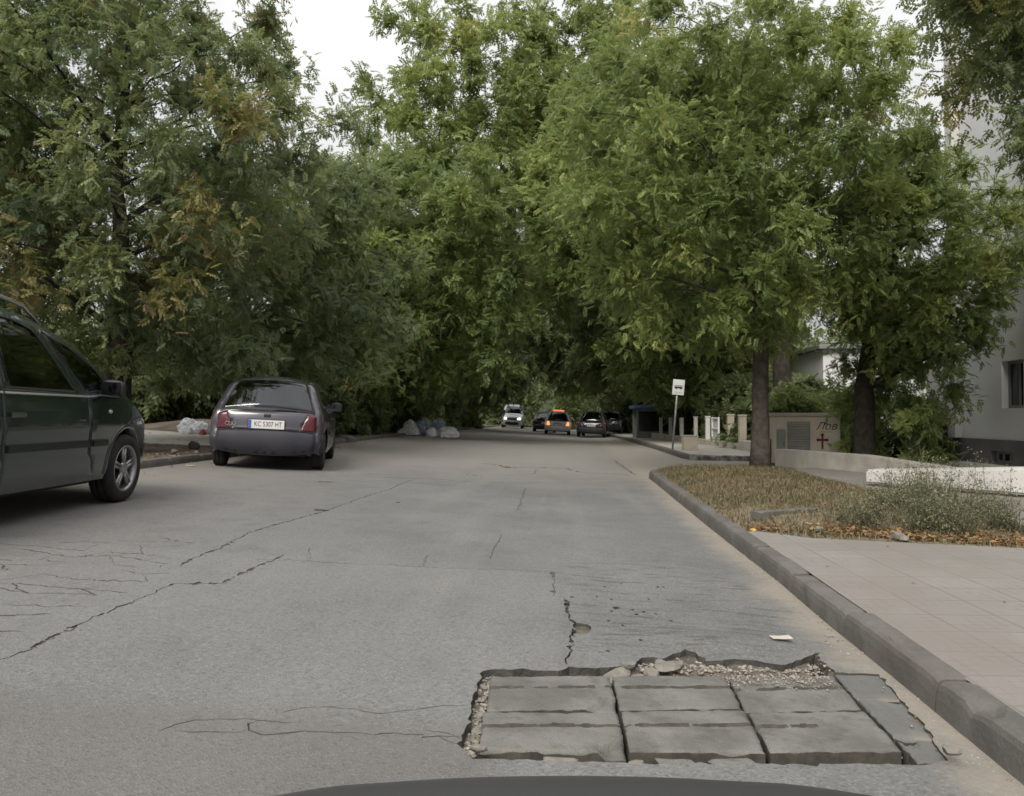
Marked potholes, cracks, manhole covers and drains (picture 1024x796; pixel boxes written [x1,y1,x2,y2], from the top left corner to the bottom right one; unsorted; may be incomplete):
pothole [572,622,591,634]
crack [160,718,461,744]
pothole [457,649,948,761]
crack [0,461,636,660]
